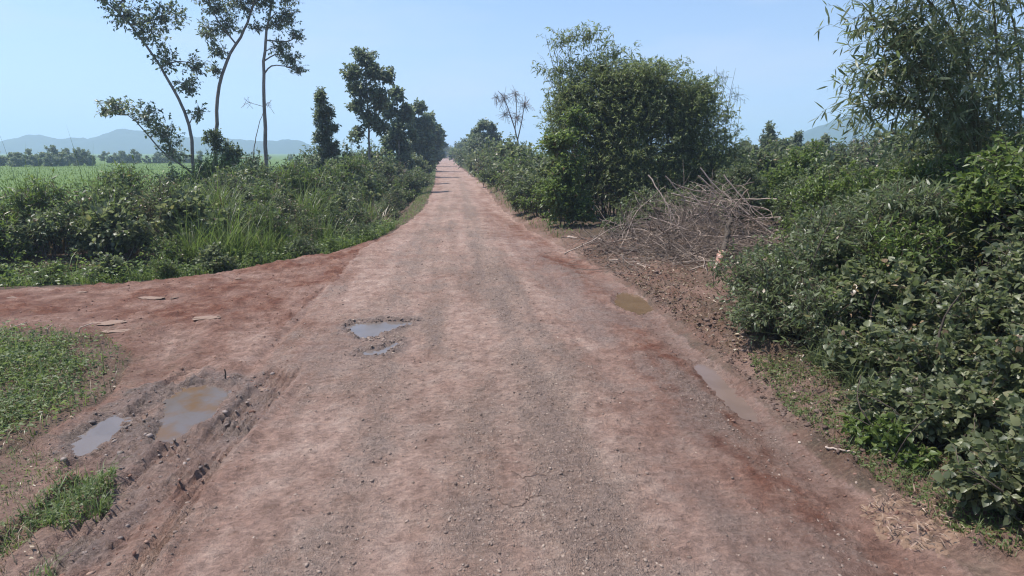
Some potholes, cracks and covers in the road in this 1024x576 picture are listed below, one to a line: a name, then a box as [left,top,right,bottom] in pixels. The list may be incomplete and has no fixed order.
pothole [55,405,143,462]
crack [502,472,549,507]
pothole [338,316,420,340]
pothole [349,337,409,359]
pothole [138,374,241,452]
